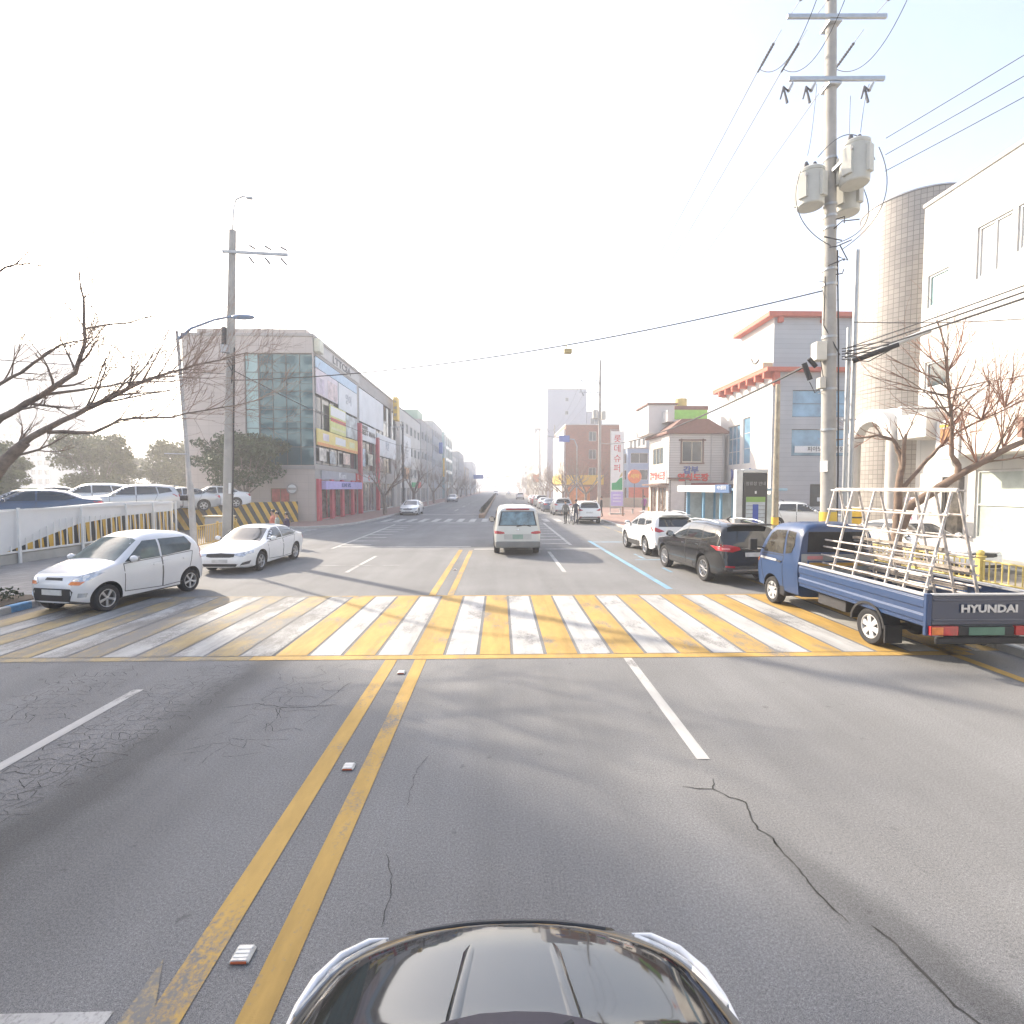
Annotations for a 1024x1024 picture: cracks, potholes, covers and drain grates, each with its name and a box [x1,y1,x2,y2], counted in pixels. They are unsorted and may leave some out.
crack [381,854,392,927]
crack [0,664,248,822]
crack [176,665,353,763]
crack [684,781,848,922]
crack [871,925,981,1024]
